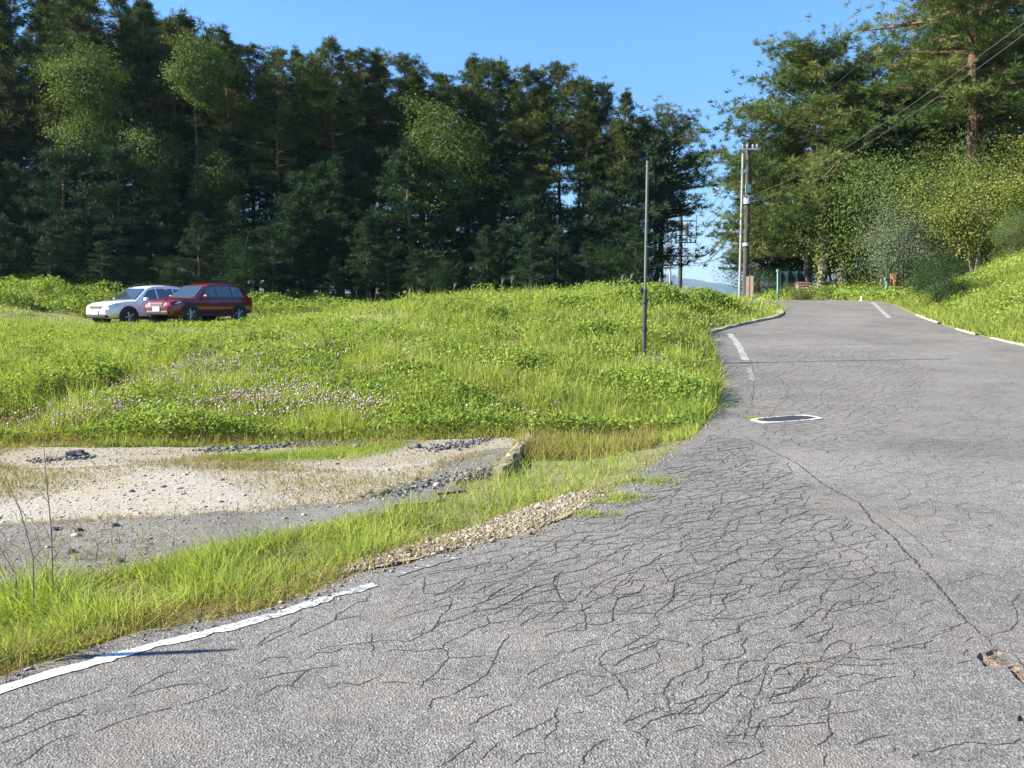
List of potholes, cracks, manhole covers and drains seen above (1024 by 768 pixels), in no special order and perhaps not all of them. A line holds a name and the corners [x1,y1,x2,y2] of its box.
crack [1,669,229,765]
crack [853,734,1022,757]
crack [726,349,1023,558]
crack [256,594,406,695]
pothole [977,649,1010,667]
crack [941,569,1024,667]
manhole cover [751,415,823,423]
